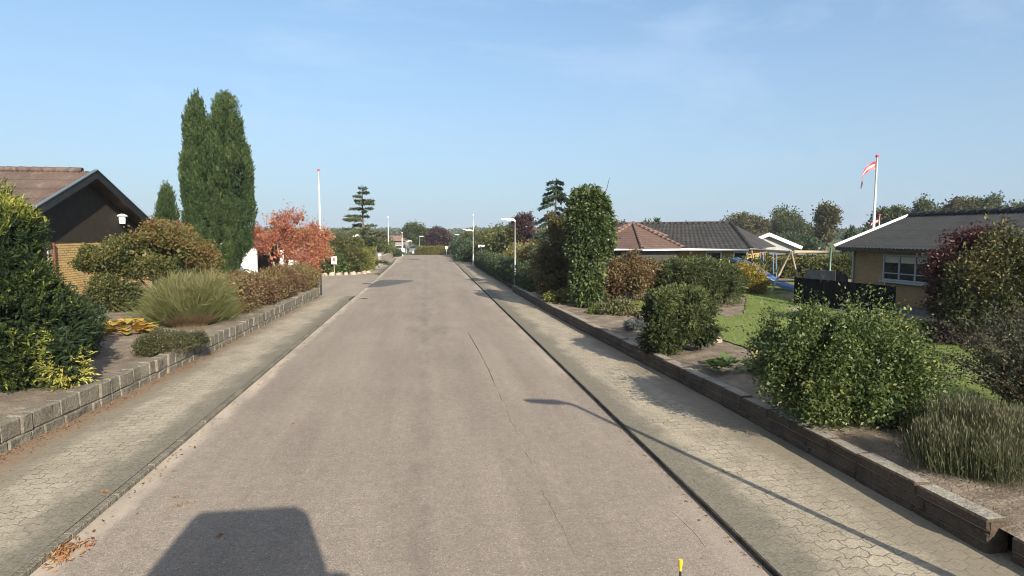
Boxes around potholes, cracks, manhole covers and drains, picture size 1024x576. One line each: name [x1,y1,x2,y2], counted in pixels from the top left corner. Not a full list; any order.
crack [468,333,574,552]
